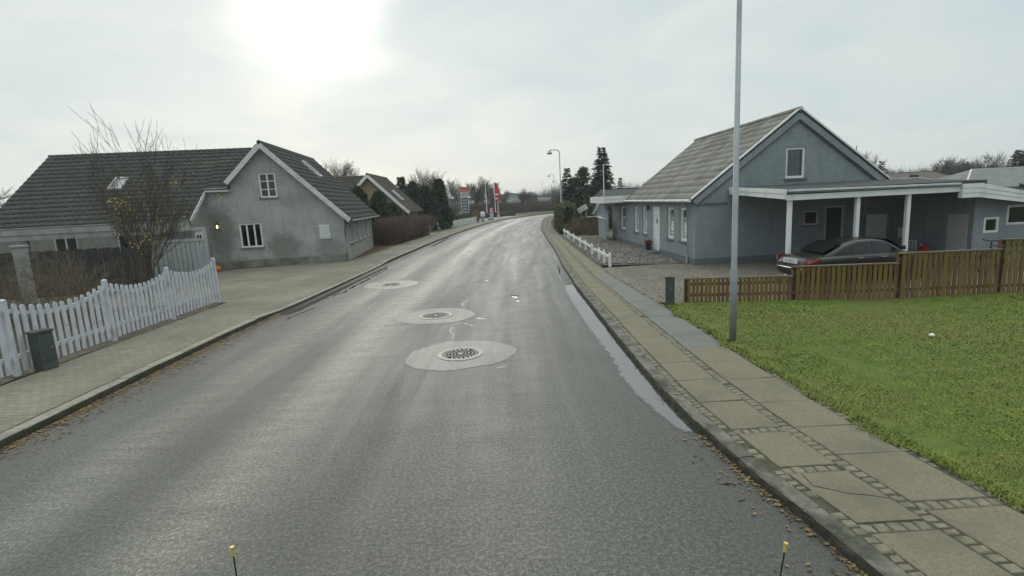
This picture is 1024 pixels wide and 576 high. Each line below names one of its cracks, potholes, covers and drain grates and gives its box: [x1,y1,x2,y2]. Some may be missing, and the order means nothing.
crack [442,295,486,338]
